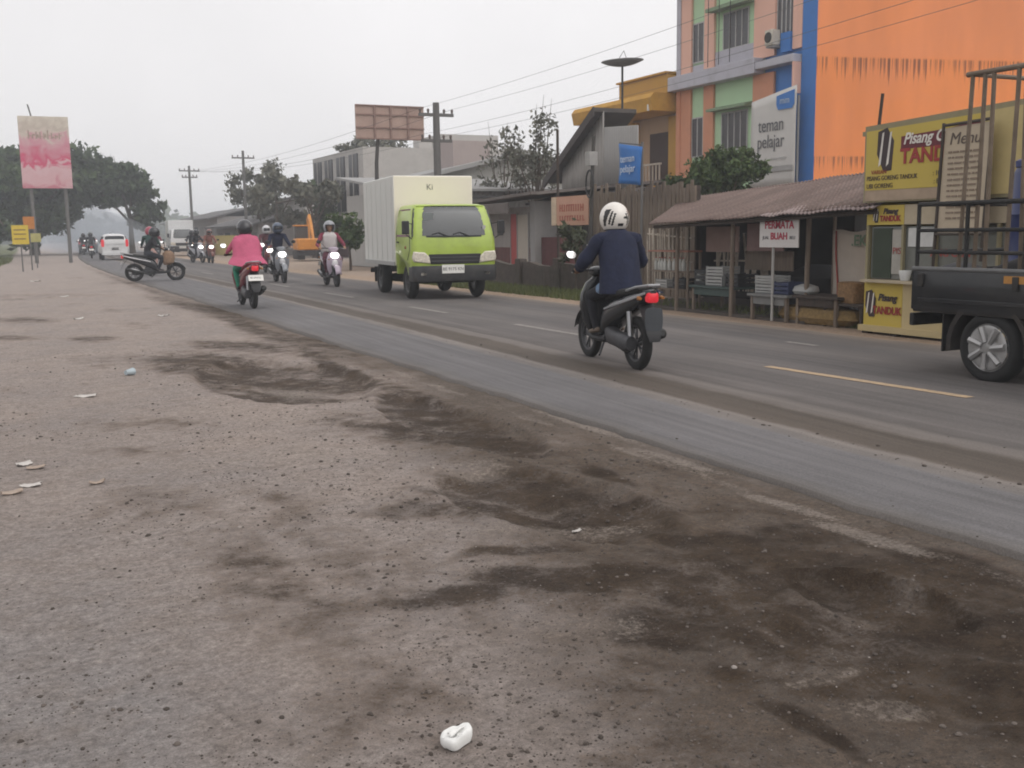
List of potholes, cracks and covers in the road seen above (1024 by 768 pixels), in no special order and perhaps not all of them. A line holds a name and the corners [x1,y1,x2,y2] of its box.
pothole [780,567,988,637]
